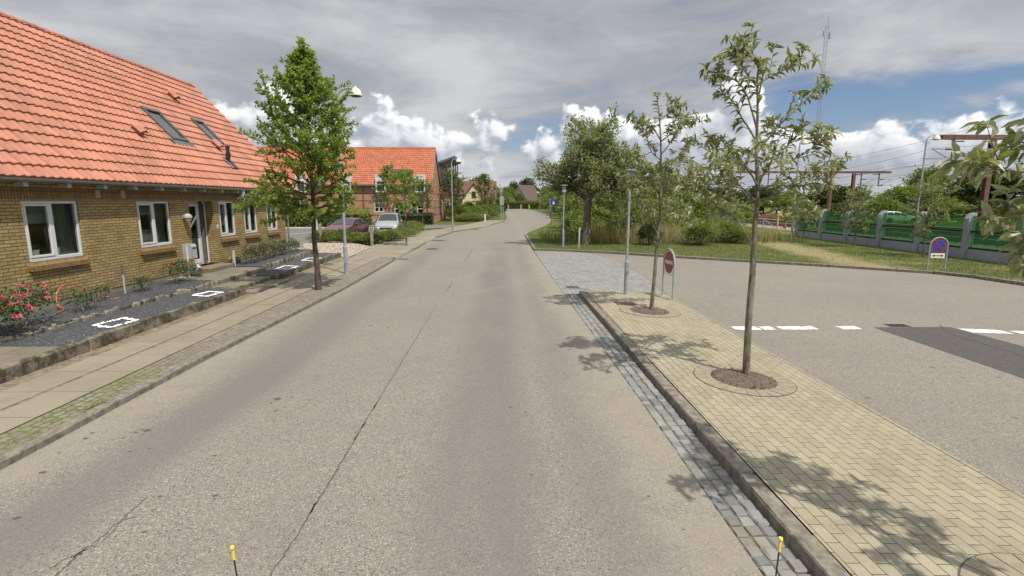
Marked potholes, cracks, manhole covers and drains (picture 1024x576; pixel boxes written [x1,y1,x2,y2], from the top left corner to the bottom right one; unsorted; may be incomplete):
crack [49,496,159,576]
